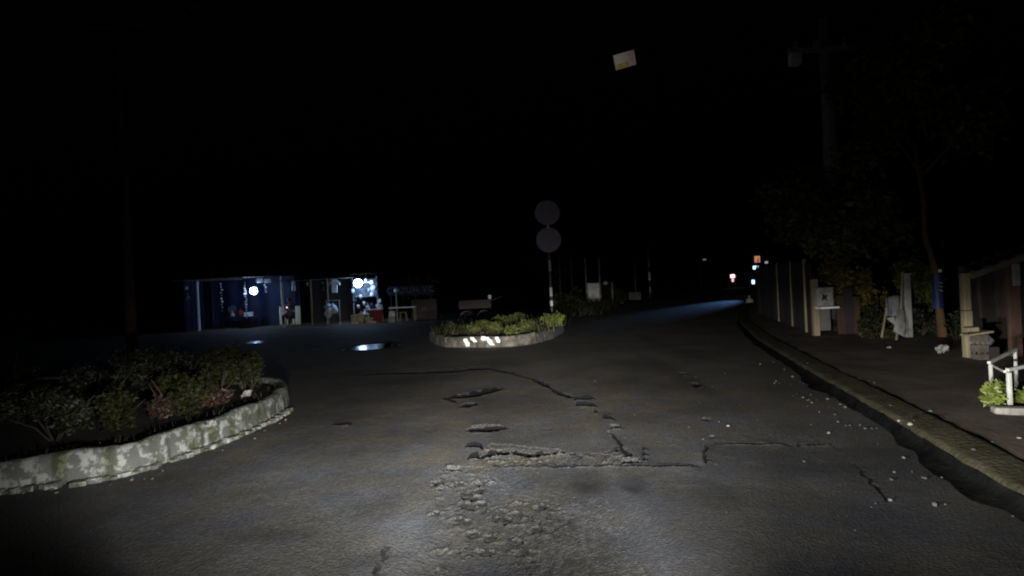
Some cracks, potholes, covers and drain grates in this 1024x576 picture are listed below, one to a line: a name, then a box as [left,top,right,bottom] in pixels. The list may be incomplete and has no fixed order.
pothole [447,387,506,399]
pothole [457,500,480,511]
pothole [464,424,510,432]
pothole [458,491,475,500]
crack [851,464,896,502]
crack [348,366,834,468]
pothole [500,516,515,526]
pothole [528,525,545,534]
pothole [431,548,448,556]
pothole [465,529,480,539]
pothole [510,548,539,558]
pothole [621,457,642,465]
